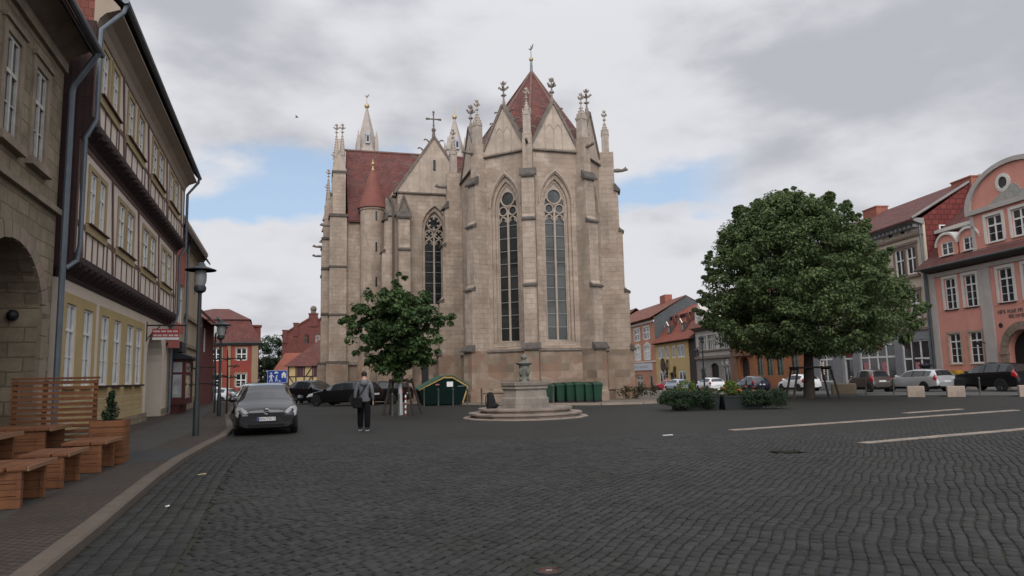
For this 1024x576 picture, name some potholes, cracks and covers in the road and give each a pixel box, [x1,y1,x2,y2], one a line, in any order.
manhole cover [534,566,564,576]
